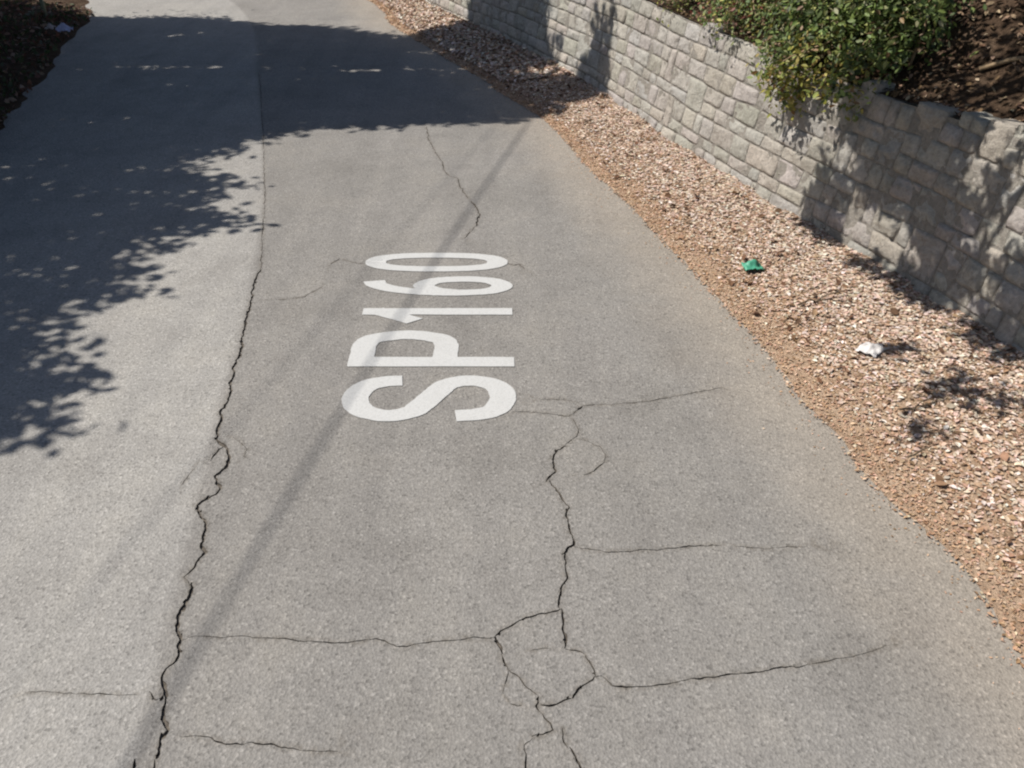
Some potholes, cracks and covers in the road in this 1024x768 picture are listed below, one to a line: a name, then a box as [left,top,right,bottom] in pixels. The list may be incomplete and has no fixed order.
crack [29,76,886,768]
